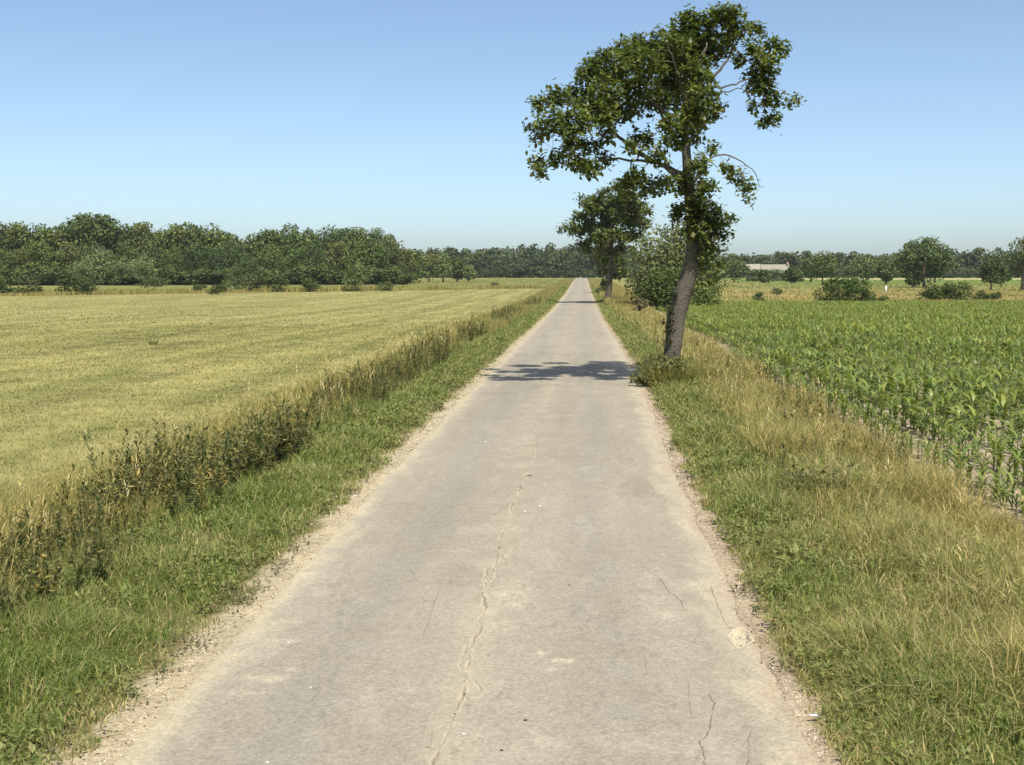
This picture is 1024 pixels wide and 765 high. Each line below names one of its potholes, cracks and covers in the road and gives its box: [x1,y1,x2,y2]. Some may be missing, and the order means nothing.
crack [418,392,553,765]
crack [651,575,735,643]
crack [671,673,758,765]
crack [638,655,653,675]
